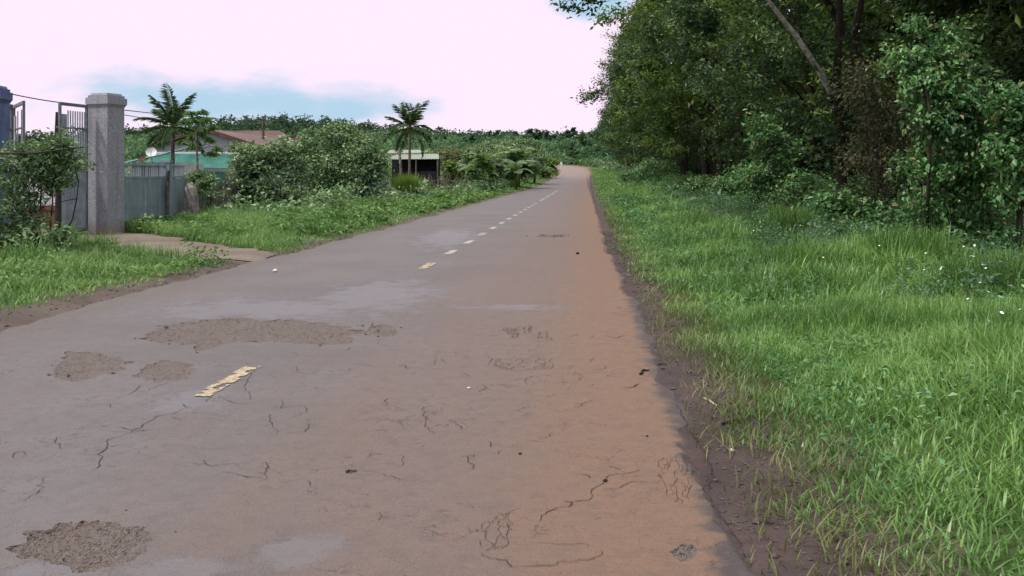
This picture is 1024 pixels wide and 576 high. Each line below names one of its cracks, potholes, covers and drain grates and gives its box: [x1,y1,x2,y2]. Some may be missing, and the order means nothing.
crack [540,404,750,565]
crack [434,503,603,566]
crack [403,355,572,390]
pothole [367,324,397,337]
pothole [670,544,699,562]
pothole [131,360,197,383]
pothole [5,520,153,573]
pothole [139,317,367,351]
pothole [51,351,135,382]
